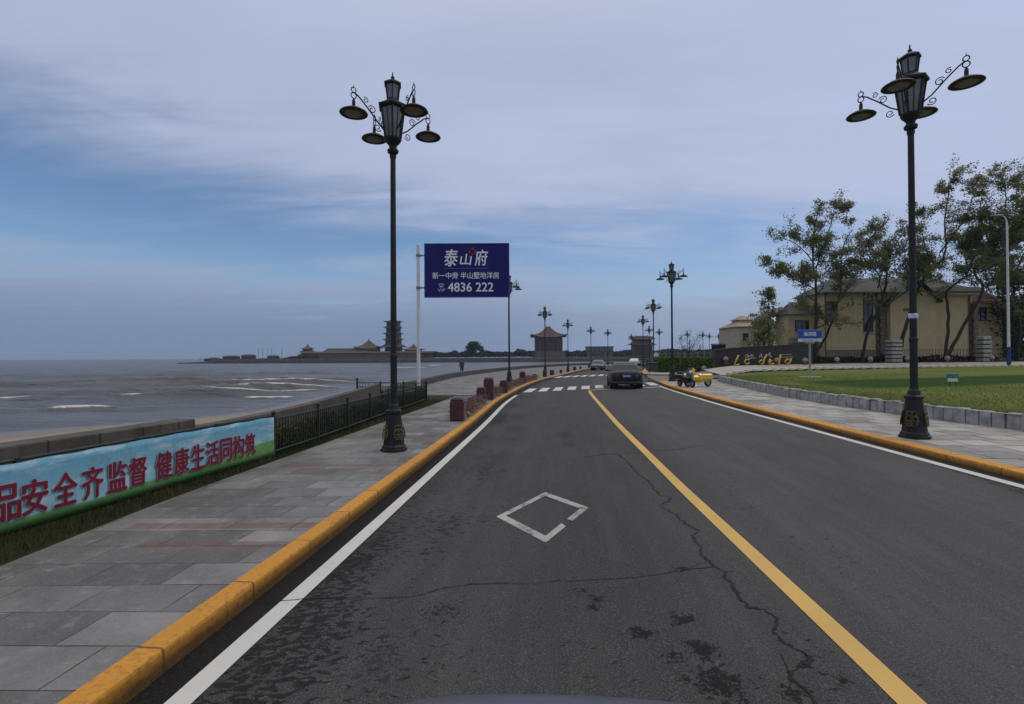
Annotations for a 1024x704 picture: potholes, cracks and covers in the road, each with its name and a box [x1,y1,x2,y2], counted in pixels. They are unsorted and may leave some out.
crack [259,579,564,603]
crack [574,444,820,704]
